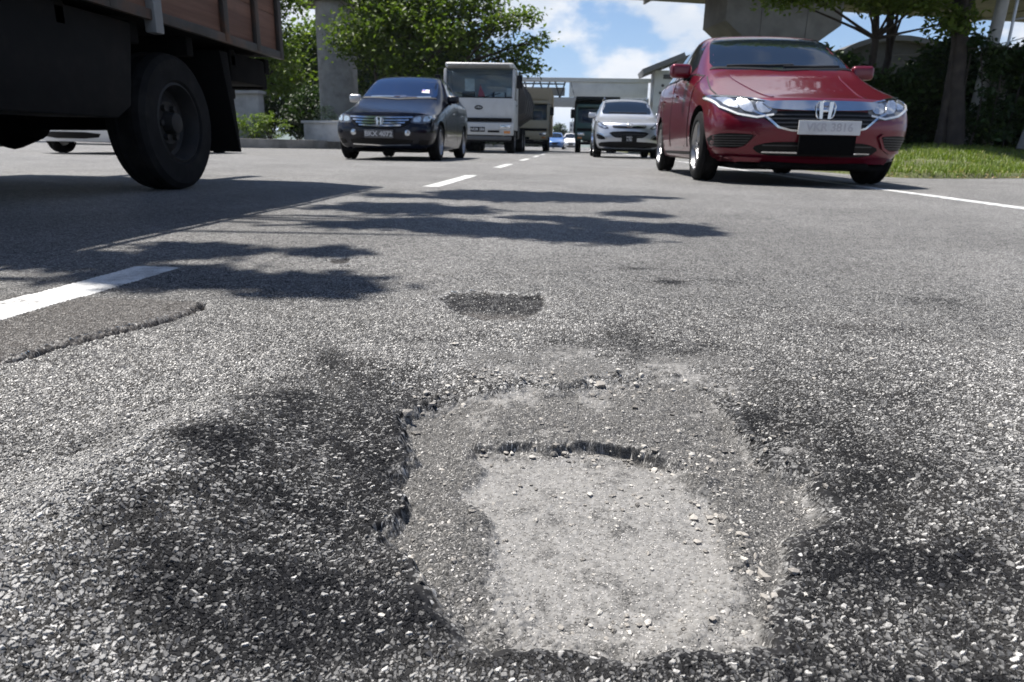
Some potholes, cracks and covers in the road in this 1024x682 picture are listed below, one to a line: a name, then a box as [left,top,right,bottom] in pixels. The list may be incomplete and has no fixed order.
pothole [365,370,842,664]
pothole [434,289,548,322]
